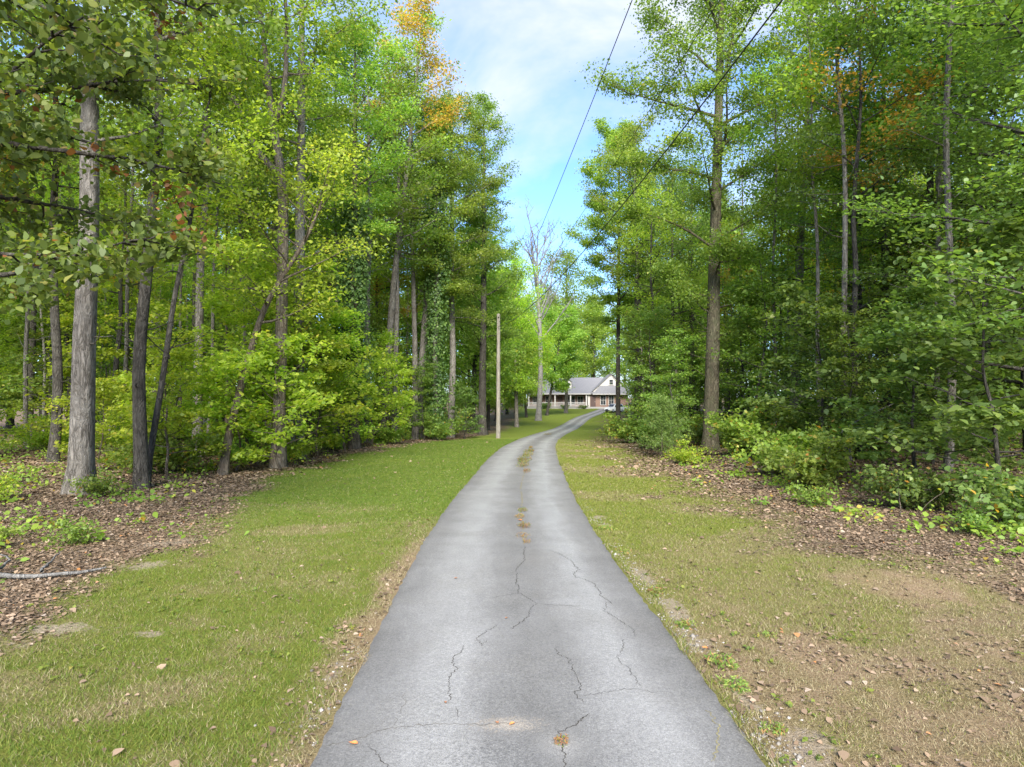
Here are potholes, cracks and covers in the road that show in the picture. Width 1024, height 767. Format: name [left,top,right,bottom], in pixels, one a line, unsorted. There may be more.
crack [490,455,572,627]
crack [555,561,671,765]
crack [323,627,505,764]
